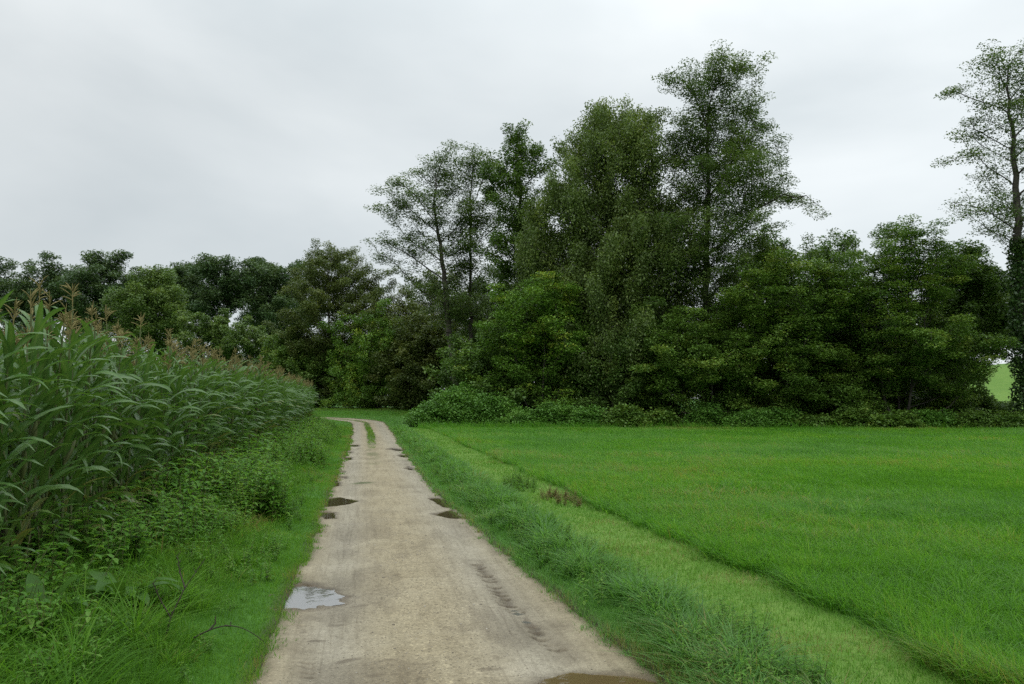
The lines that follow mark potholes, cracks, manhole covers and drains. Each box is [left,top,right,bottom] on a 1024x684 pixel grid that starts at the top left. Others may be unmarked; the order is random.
pothole [269,582,350,612]
pothole [319,510,344,521]
pothole [423,509,467,520]
pothole [512,669,663,684]
pothole [325,497,365,509]
pothole [420,497,451,509]
